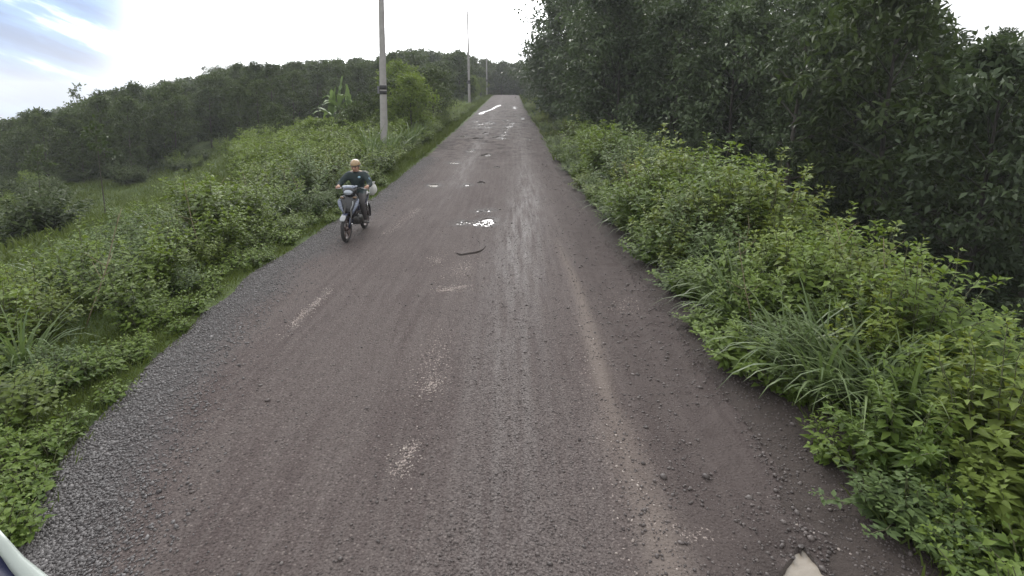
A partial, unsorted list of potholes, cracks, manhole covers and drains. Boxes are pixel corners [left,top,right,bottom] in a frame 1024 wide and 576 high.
pothole [472,218,496,227]
crack [456,246,486,256]
